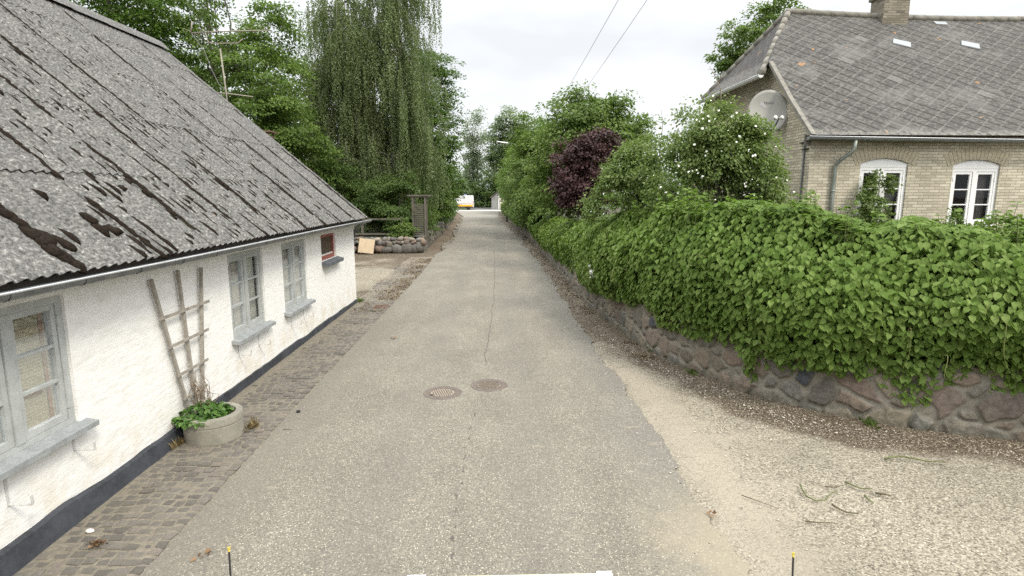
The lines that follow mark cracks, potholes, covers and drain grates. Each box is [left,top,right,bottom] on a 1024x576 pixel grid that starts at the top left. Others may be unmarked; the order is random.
manhole cover [471,379,507,391]
crack [484,252,495,363]
